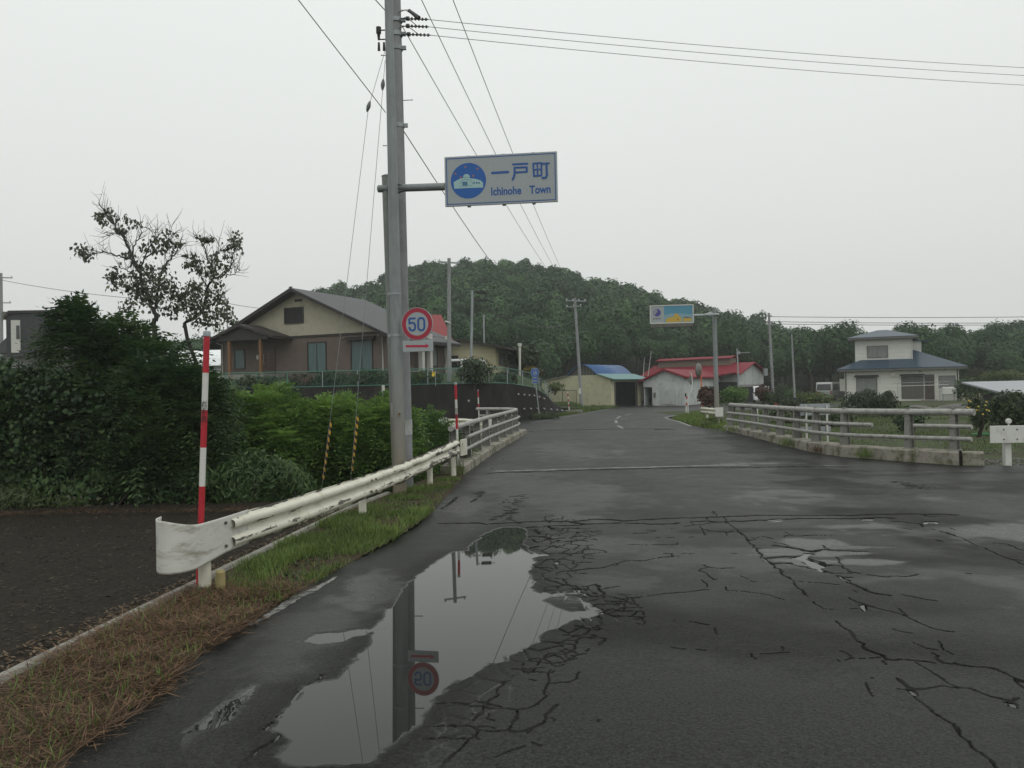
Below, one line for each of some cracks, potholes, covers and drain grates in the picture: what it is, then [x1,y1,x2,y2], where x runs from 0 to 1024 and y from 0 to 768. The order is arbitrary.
pothole [791,553,825,573]
crack [440,497,1024,768]
